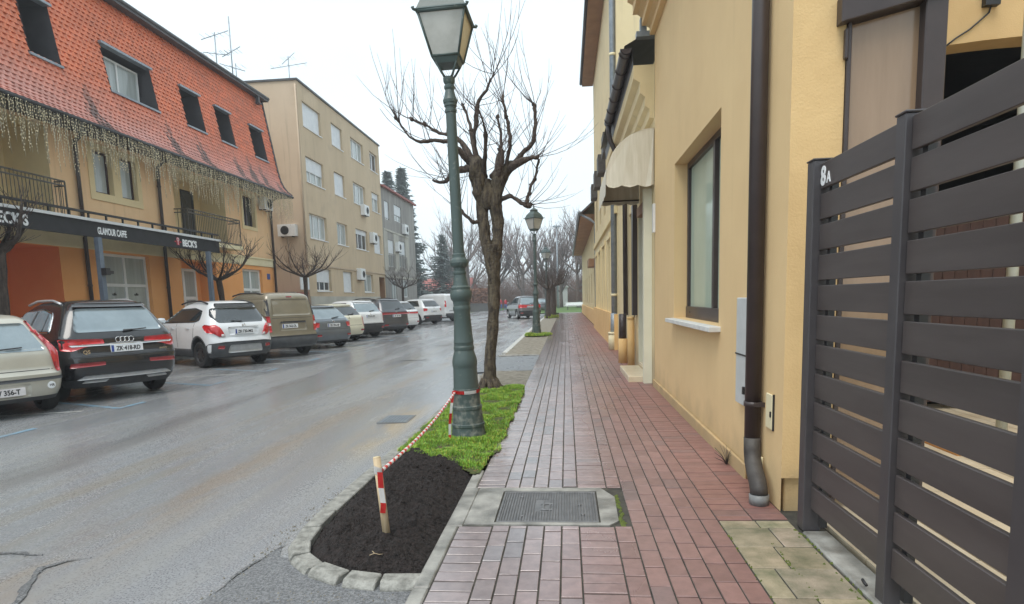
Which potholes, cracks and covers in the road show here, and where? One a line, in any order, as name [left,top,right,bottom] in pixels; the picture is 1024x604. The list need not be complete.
crack [0,551,92,604]
manhole cover [464,488,619,527]
